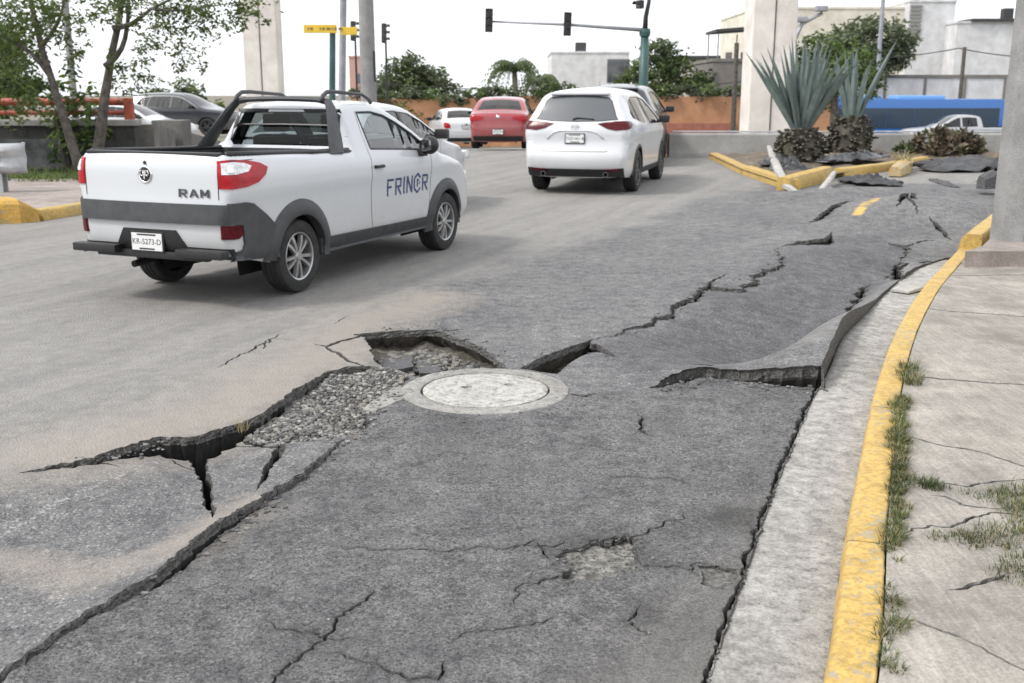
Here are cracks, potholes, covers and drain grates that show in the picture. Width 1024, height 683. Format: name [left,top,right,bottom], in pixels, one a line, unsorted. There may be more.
manhole cover [402,368,569,415]
crack [949,574,1006,590]
pothole [244,366,409,459]
crack [0,370,738,683]
crack [590,201,851,353]
crack [214,316,346,369]
pothole [312,329,509,378]
crack [844,193,952,312]
pothole [555,534,640,582]
